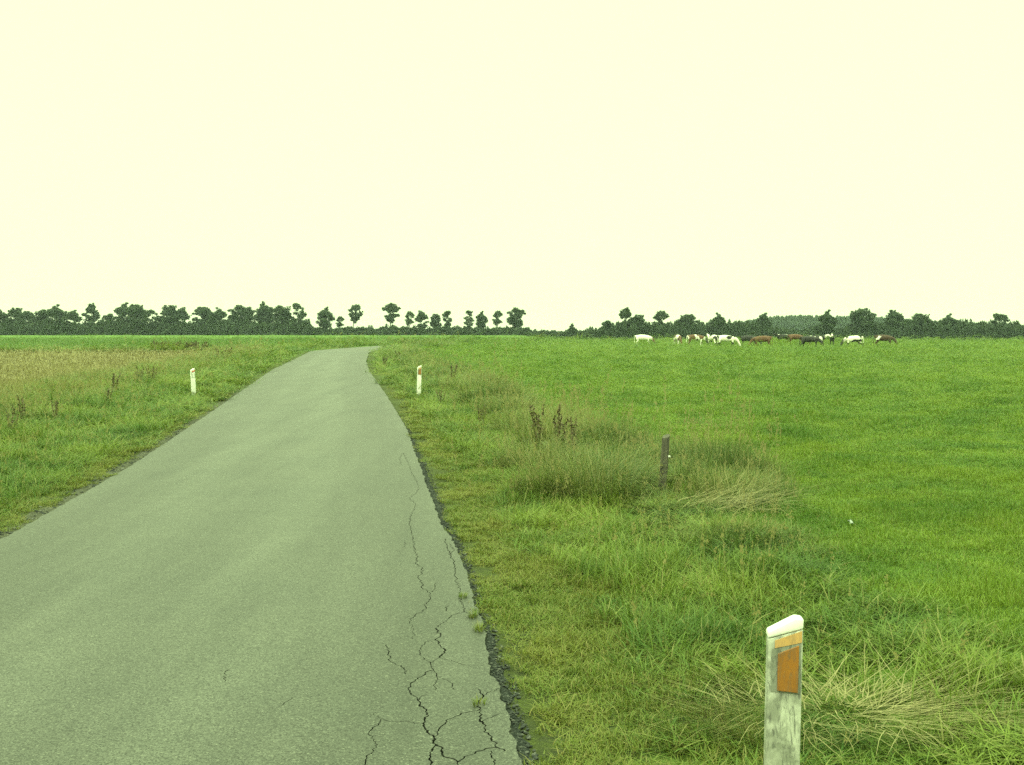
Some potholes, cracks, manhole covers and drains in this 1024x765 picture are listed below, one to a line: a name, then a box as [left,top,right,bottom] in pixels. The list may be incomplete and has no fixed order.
crack [364,453,506,765]
